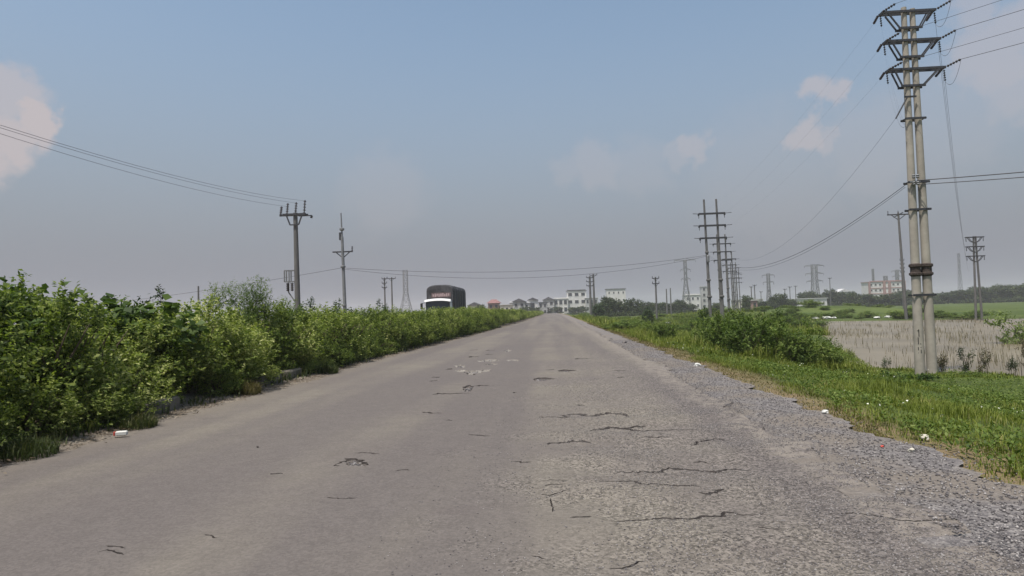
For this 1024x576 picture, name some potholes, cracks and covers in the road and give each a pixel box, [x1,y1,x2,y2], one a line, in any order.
pothole [344,458,369,466]
crack [538,405,779,530]
crack [99,546,124,555]
